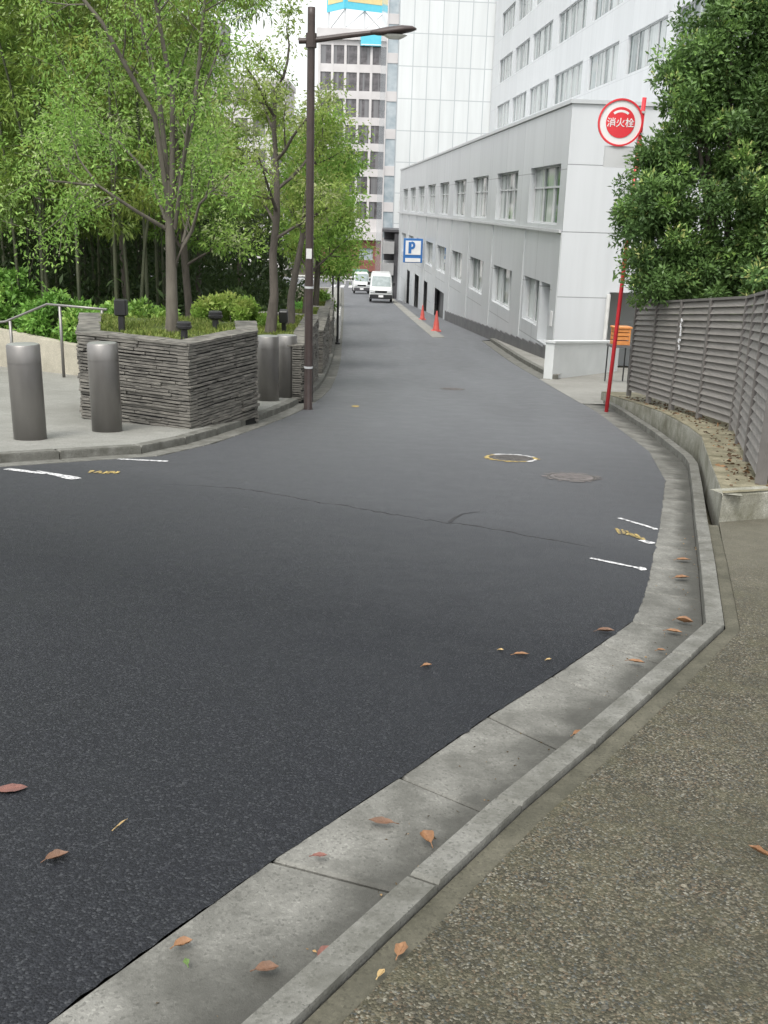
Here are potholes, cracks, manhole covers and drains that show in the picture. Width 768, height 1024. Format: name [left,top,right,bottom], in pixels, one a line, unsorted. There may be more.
crack [153,483,596,548]
manhole cover [484,454,540,462]
manhole cover [542,472,602,482]
